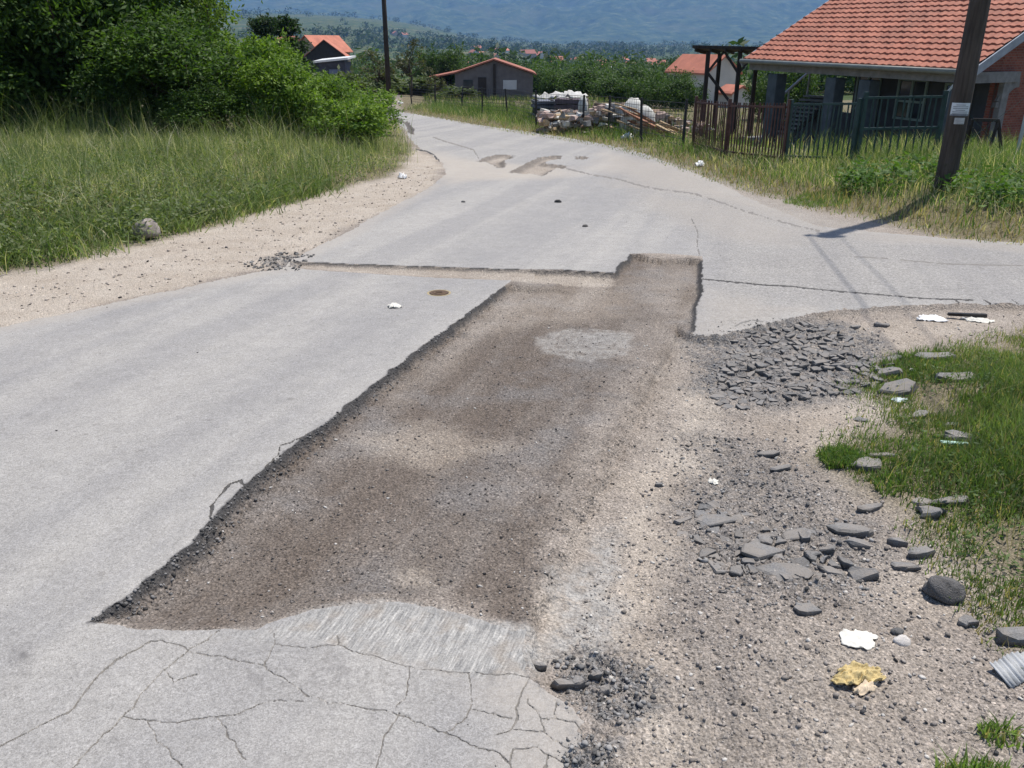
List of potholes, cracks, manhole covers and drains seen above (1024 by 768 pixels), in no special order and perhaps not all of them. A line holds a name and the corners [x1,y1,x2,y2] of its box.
crack [702,278,991,305]
crack [0,629,583,768]
crack [209,479,246,517]
crack [566,168,820,255]
crack [265,427,318,467]
crack [416,137,479,162]
crack [854,256,1024,266]
